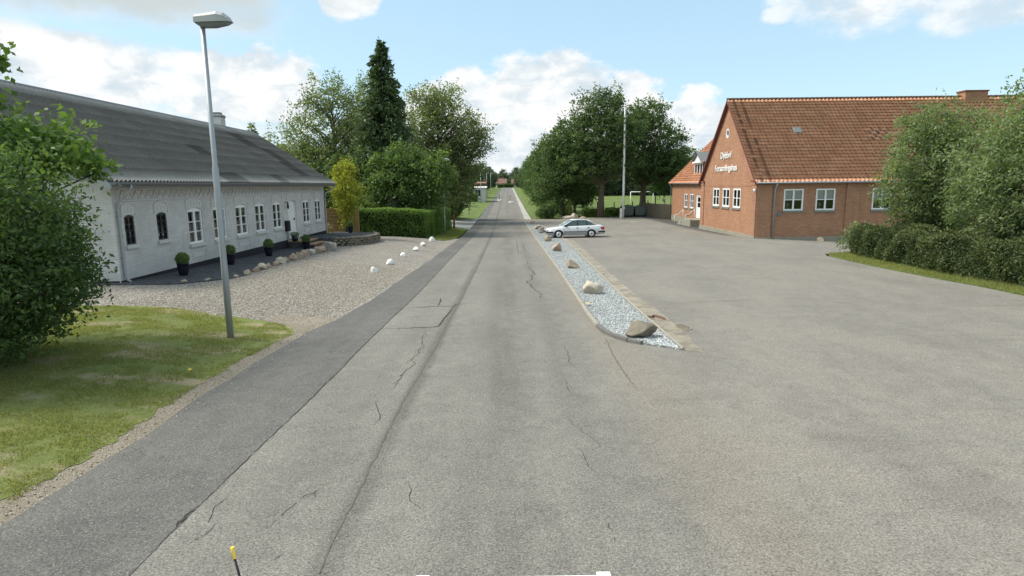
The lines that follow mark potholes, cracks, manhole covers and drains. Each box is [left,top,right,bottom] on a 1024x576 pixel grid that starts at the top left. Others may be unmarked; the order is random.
crack [381,298,465,390]
crack [176,495,228,541]
